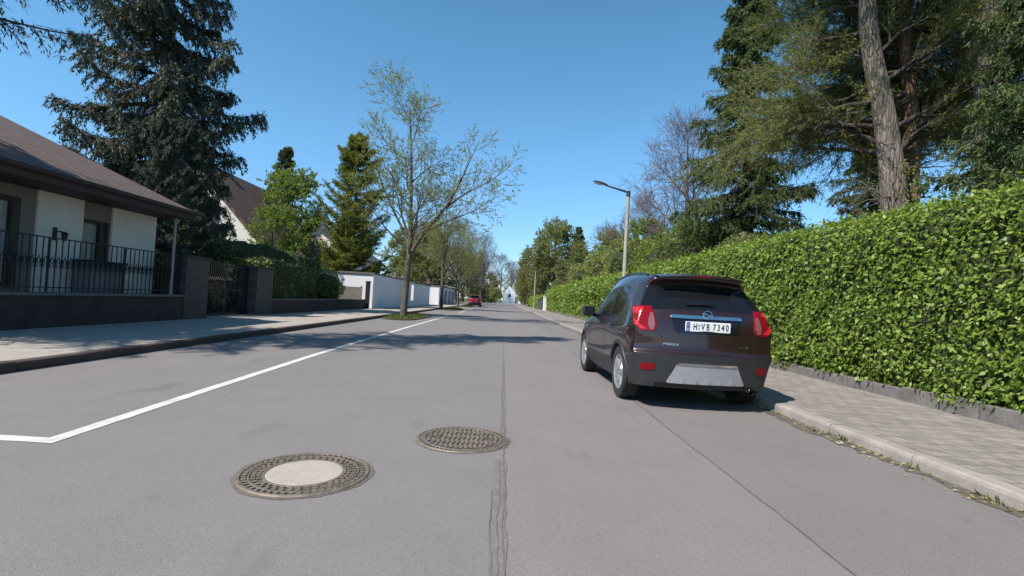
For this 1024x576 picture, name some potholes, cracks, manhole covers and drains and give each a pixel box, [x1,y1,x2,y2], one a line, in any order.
manhole cover [415,426,511,454]
manhole cover [230,453,375,500]
